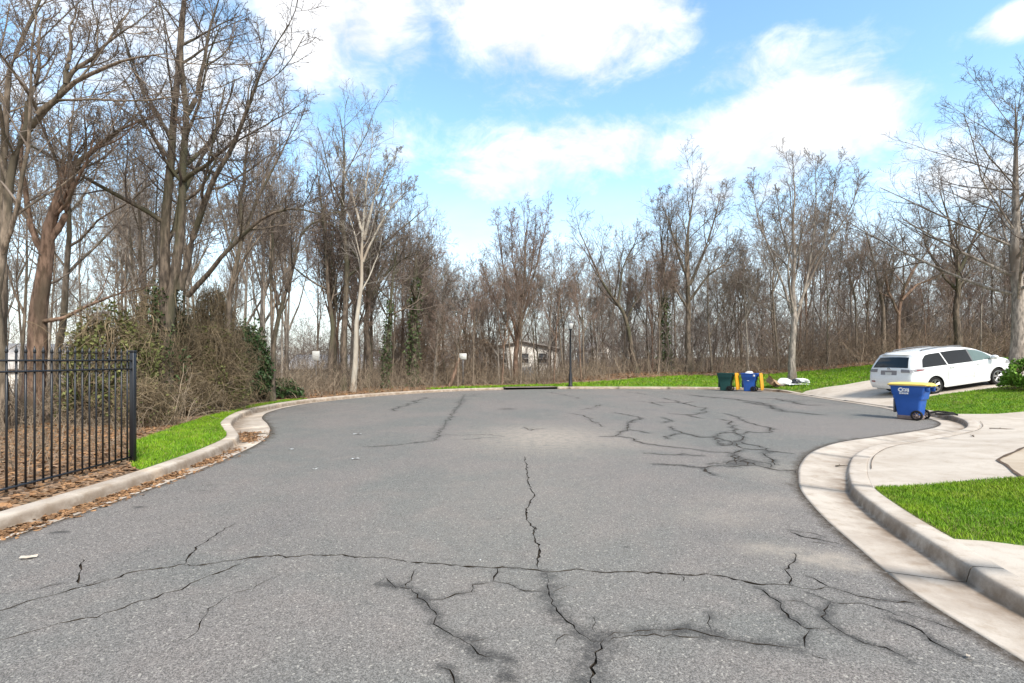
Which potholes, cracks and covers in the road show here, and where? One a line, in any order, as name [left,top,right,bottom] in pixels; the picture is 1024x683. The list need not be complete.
crack [556,393,818,474]
crack [0,459,966,683]
